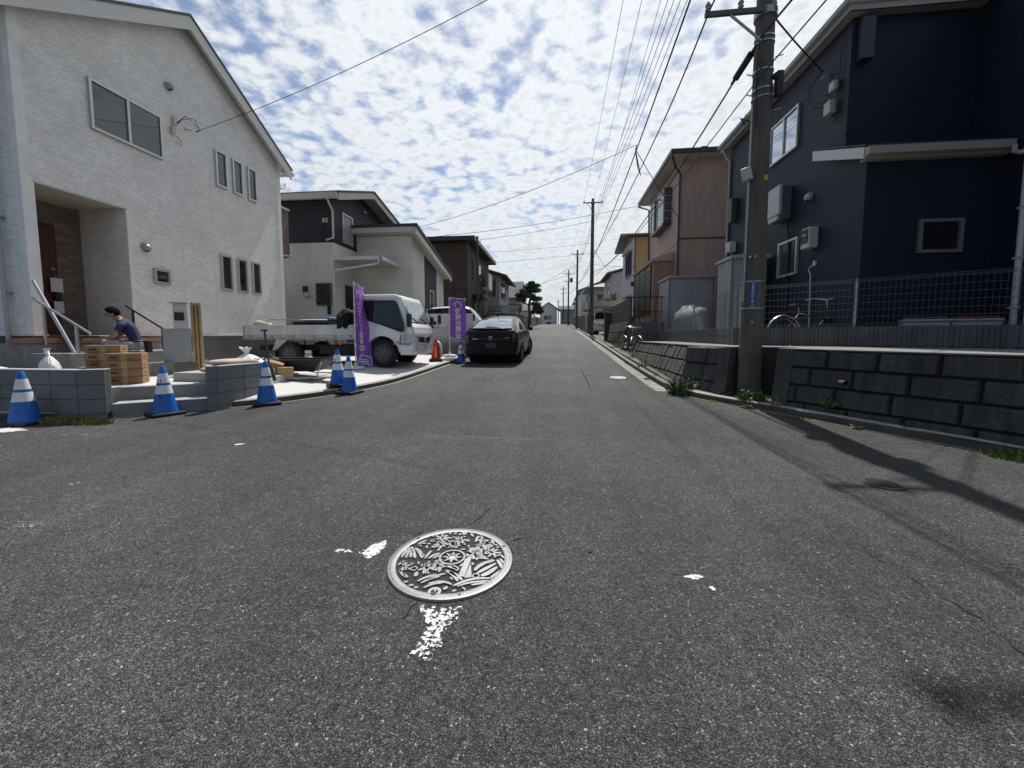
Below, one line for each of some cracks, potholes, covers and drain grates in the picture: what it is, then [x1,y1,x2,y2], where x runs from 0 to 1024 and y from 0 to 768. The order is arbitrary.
manhole cover [387,529,513,602]
crack [868,552,1024,654]
manhole cover [861,478,906,491]
